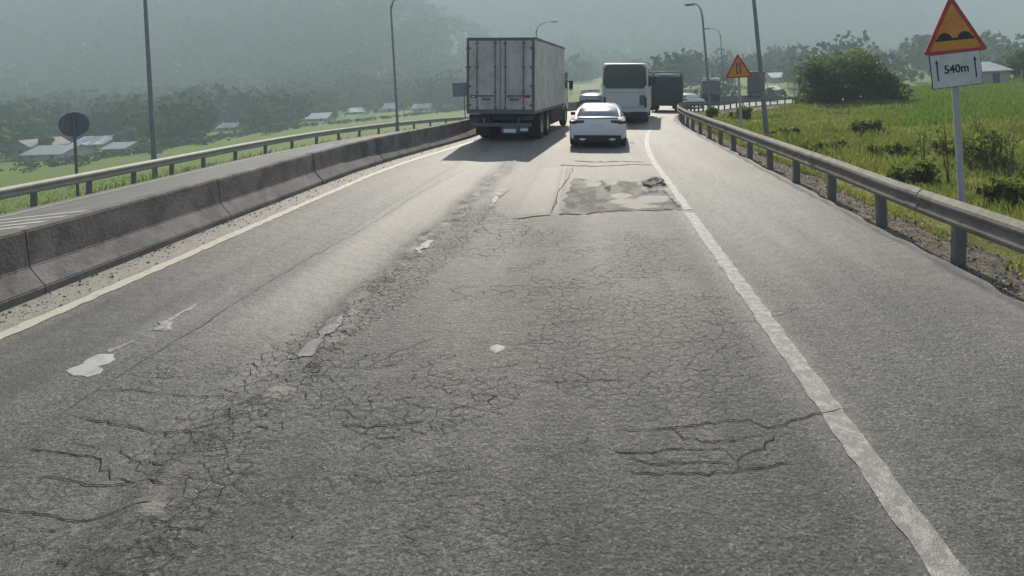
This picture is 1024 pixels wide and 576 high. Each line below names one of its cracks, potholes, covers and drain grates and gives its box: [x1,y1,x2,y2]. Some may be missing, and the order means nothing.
crack [3,161,693,576]
crack [527,408,846,475]
